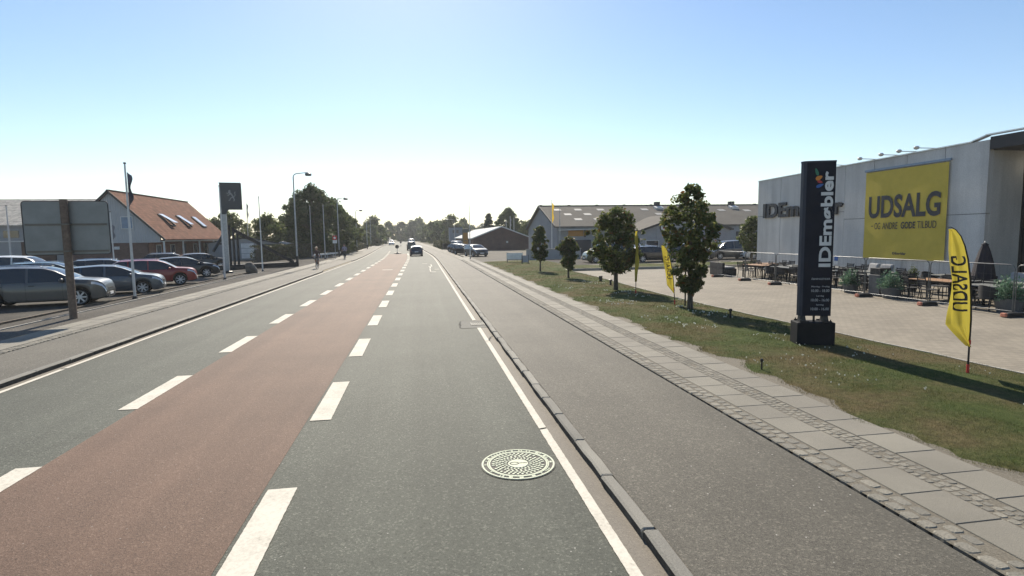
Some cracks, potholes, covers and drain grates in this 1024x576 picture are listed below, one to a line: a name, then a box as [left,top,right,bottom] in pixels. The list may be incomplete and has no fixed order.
manhole cover [481,449,556,480]
